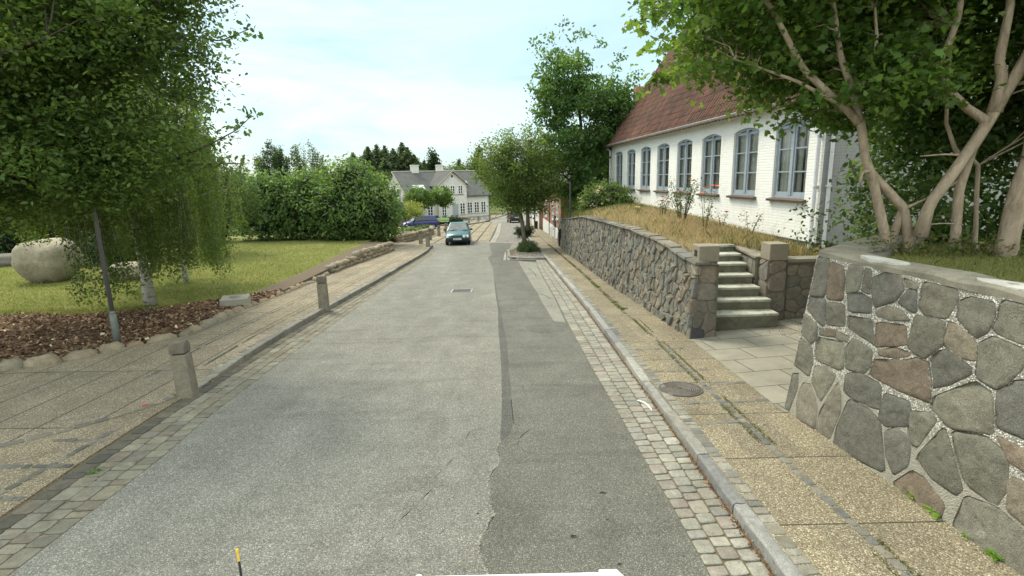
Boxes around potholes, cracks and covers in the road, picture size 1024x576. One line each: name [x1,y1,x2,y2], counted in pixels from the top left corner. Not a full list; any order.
crack [363,399,535,575]
manhole cover [659,381,703,397]
